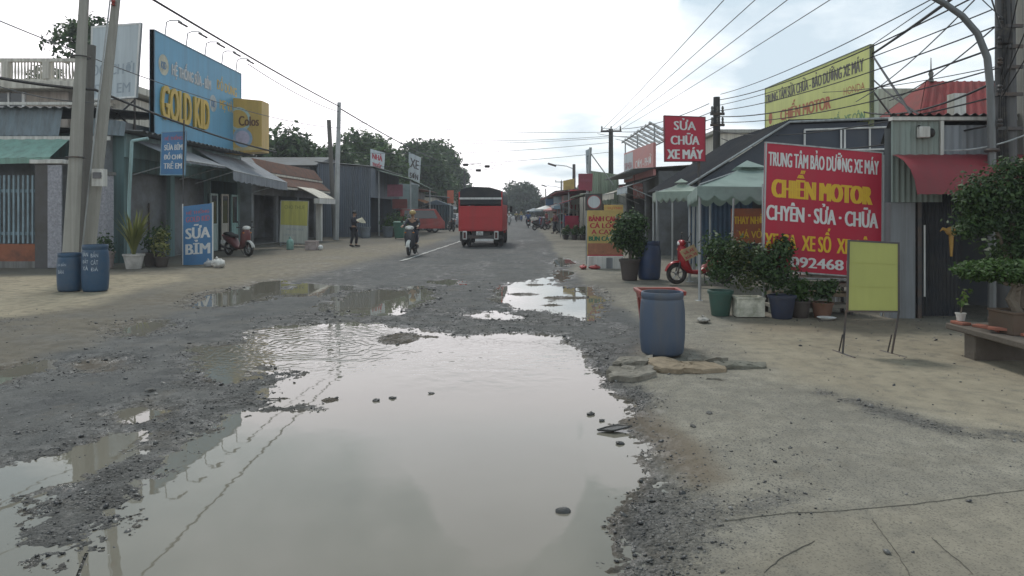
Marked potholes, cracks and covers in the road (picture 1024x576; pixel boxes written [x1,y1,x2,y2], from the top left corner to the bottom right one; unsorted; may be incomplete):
crack [931,537,973,574]
pothole [78,322,670,576]
pothole [0,538,85,576]
pothole [0,450,118,501]
pothole [0,495,57,544]
pothole [0,359,58,389]
pothole [53,353,140,376]
pothole [284,282,354,297]
pothole [312,288,440,317]
crack [764,541,814,573]
pothole [182,278,295,308]
pothole [486,277,613,321]
